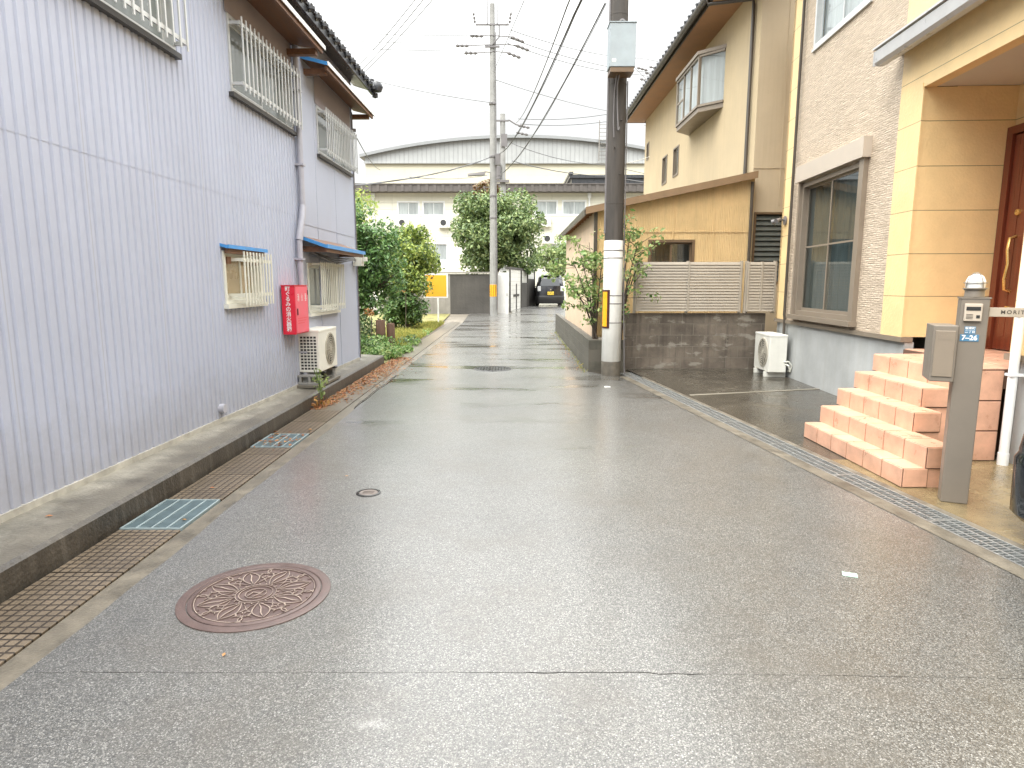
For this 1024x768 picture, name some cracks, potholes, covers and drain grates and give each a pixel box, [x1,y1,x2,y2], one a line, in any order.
drain grate [620,372,649,381]
drain grate [687,405,740,422]
utility cover [356,488,381,497]
drain grate [833,474,956,521]
drain grate [638,381,673,392]
drain grate [723,422,788,444]
drain grate [119,499,220,532]
drain grate [250,434,309,449]
manhole cover [175,563,331,633]
drain grate [660,392,702,405]
drain grate [928,520,1024,567]
drain grate [768,444,855,475]
